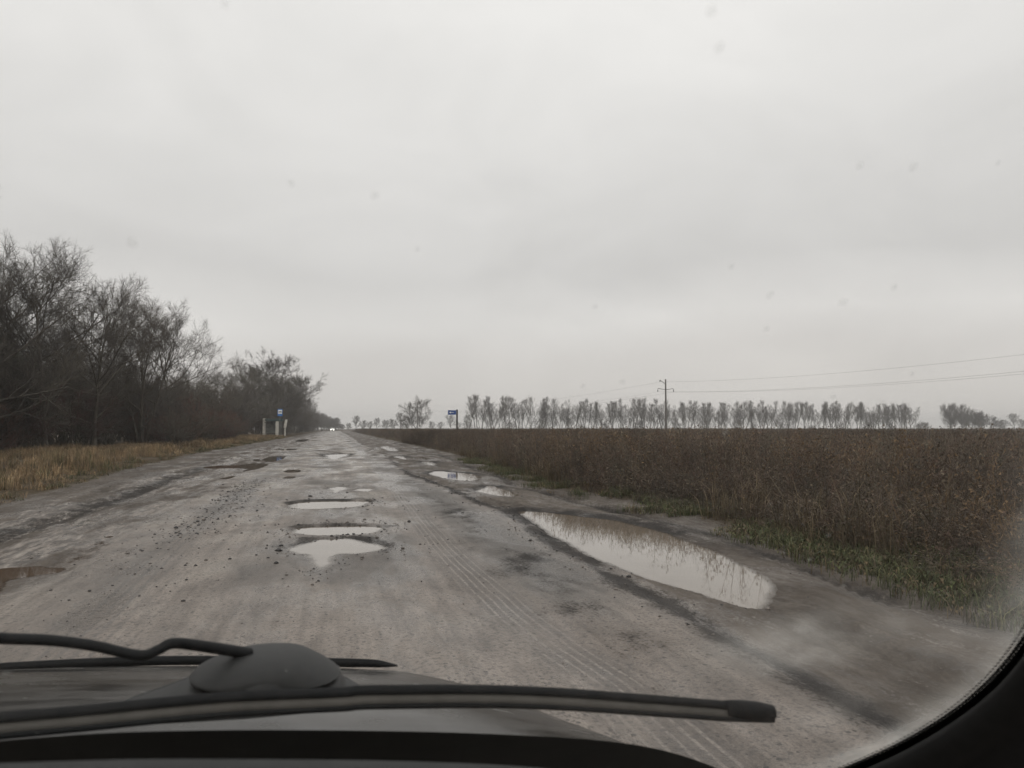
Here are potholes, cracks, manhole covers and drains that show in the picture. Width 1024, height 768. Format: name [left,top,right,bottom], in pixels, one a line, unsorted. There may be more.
pothole [0,559,110,600]
pothole [265,522,408,540]
pothole [268,498,391,510]
pothole [254,535,419,577]
pothole [412,470,500,483]
pothole [185,462,285,473]
pothole [493,506,828,621]
